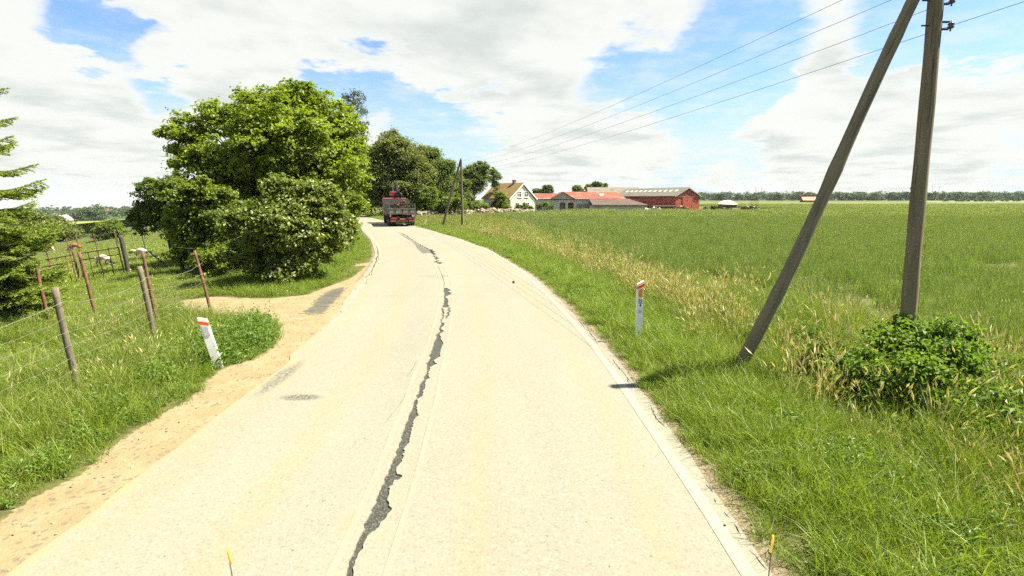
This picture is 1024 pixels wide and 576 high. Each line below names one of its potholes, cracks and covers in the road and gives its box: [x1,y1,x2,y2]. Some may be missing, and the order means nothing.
crack [341,234,451,576]
